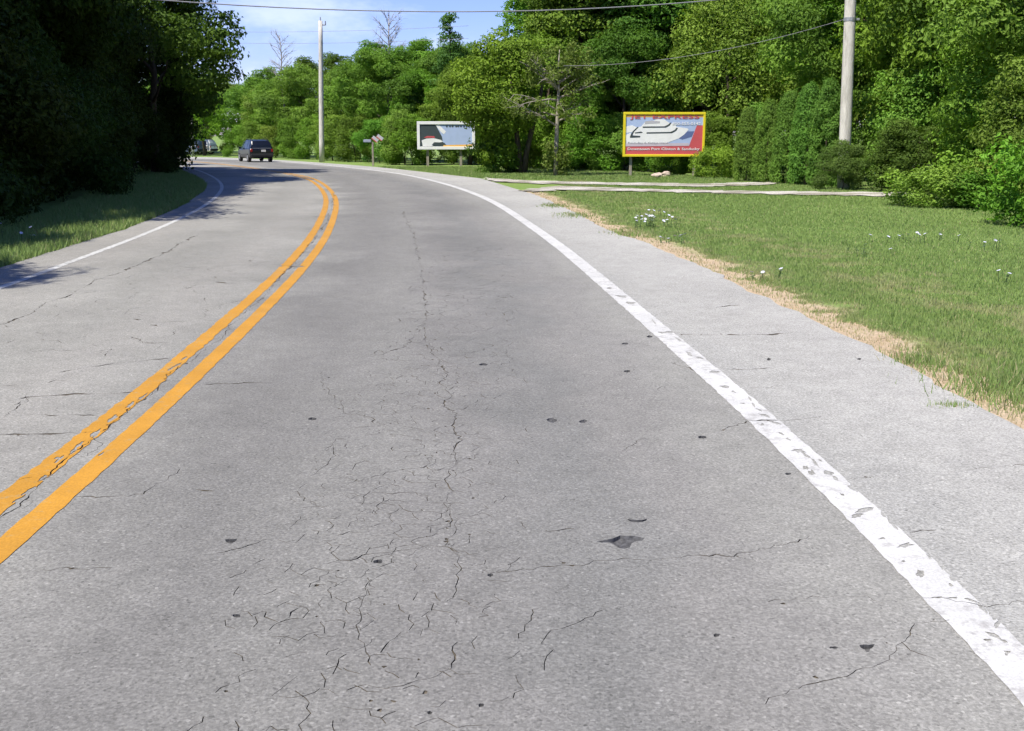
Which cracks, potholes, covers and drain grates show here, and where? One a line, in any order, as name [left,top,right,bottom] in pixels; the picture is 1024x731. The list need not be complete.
crack [496,536,809,573]
crack [187,211,602,731]
crack [765,619,943,704]
pothole [597,535,644,549]
